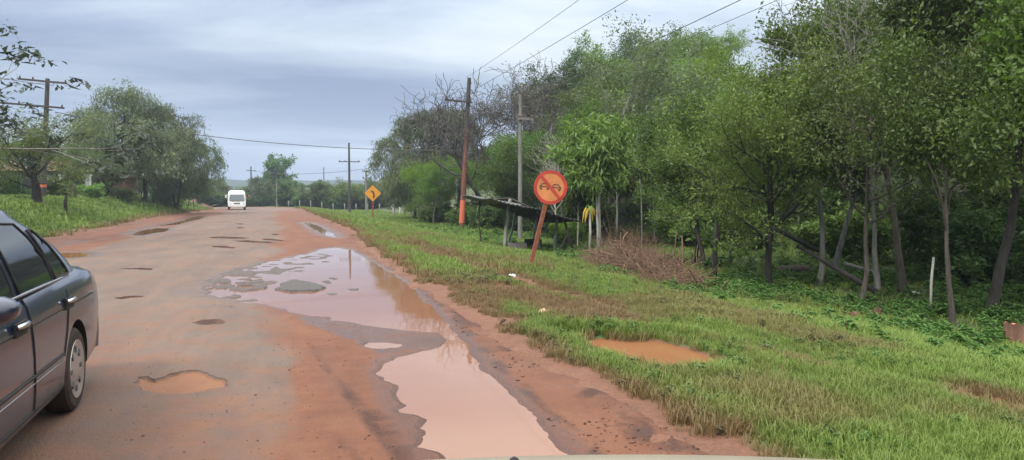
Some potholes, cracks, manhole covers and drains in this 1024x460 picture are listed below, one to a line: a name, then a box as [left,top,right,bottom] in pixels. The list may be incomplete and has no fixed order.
pothole [134,370,228,394]
pothole [201,247,578,459]
